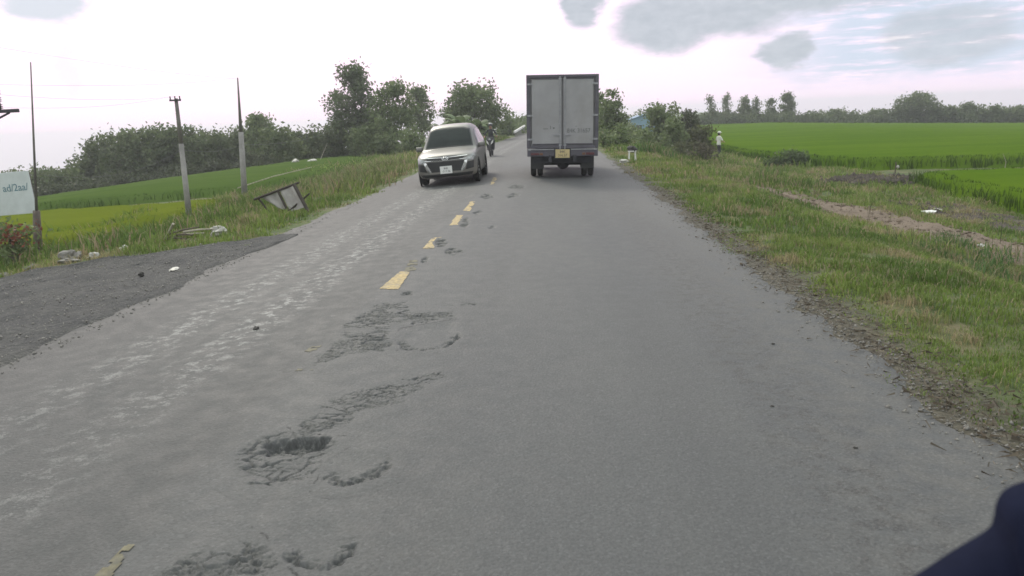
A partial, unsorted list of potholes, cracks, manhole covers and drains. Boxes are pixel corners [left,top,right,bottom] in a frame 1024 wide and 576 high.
pothole [427,237,456,248]
pothole [209,423,361,500]
